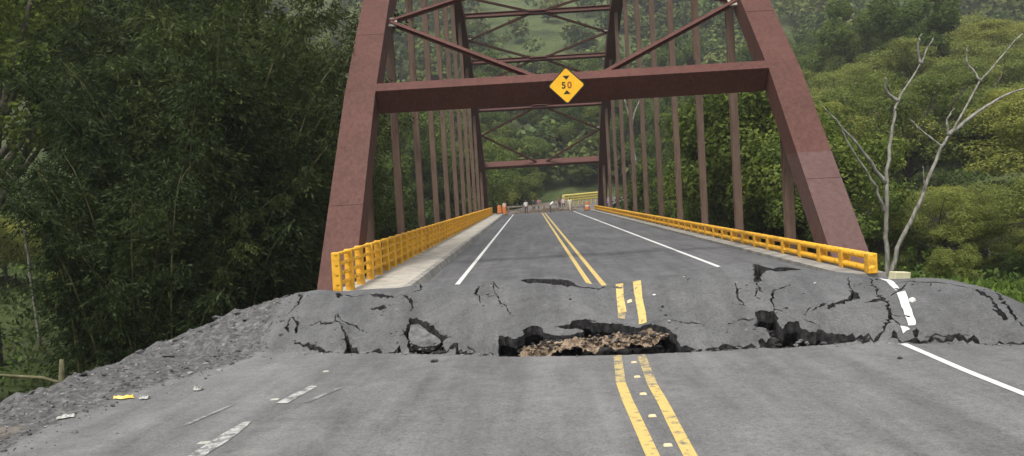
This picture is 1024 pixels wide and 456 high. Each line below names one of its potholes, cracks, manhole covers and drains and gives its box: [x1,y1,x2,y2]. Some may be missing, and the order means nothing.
crack [449,343,493,355]
crack [284,284,423,354]
pothole [401,318,450,354]
crack [728,264,800,324]
crack [474,279,618,313]
pothole [498,319,699,357]
crack [805,277,1024,345]
